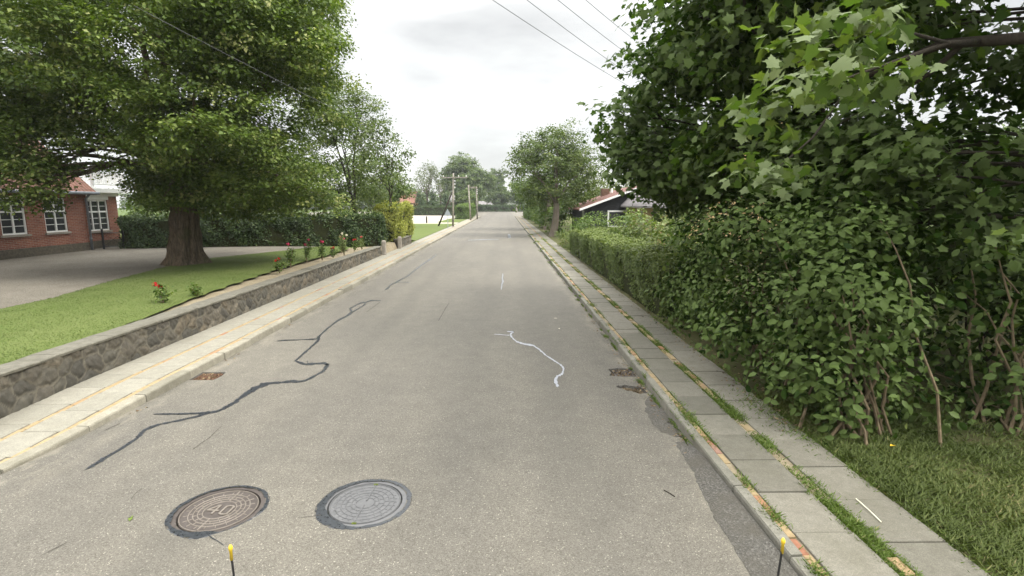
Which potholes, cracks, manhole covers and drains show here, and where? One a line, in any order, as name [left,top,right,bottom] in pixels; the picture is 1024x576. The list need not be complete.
manhole cover [164,485,270,539]
drain grate [190,372,226,380]
pothole [616,385,647,394]
manhole cover [315,479,412,530]
